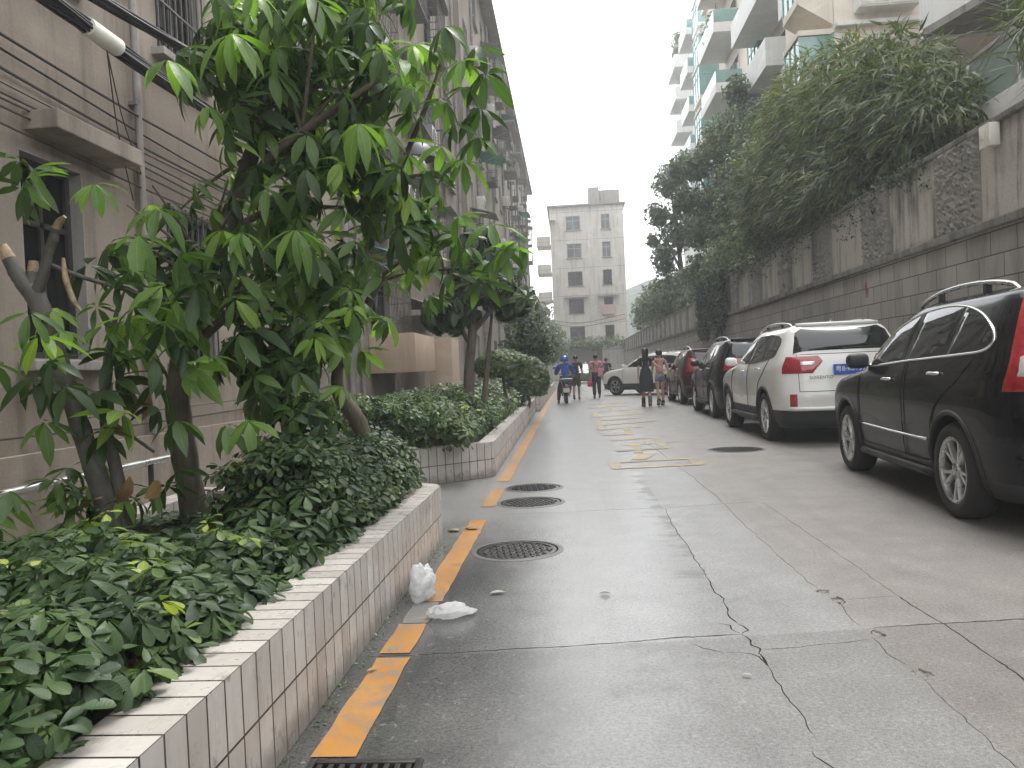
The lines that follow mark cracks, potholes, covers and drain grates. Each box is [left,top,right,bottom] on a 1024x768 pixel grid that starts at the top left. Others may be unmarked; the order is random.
drain grate [305,758,424,768]
crack [370,466,1024,768]
manhole cover [497,497,565,509]
manhole cover [471,540,564,562]
pothole [911,667,934,677]
manhole cover [504,483,564,493]
